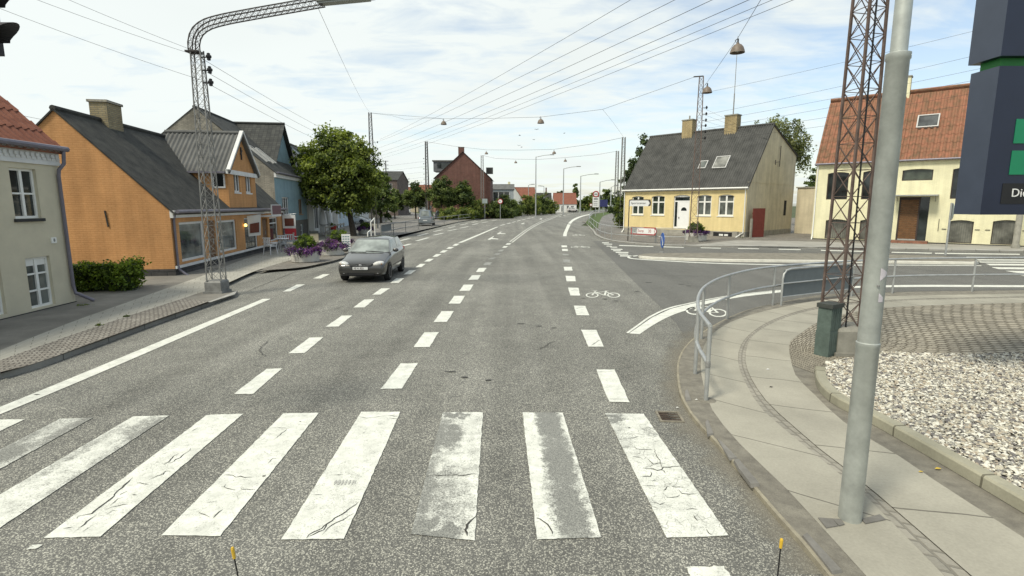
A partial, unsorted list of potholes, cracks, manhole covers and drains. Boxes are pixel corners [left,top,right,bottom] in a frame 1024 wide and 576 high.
crack [628,437,712,535]
crack [306,503,357,538]
drain grate [655,411,685,423]
crack [68,452,185,530]
